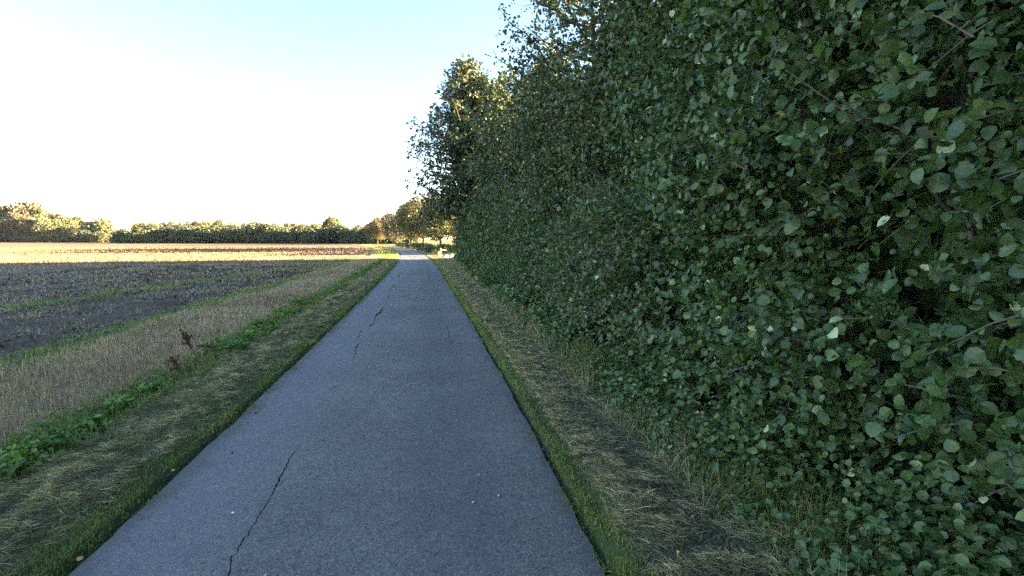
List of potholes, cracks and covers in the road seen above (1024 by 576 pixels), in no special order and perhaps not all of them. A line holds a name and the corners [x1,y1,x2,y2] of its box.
crack [228,443,301,576]
